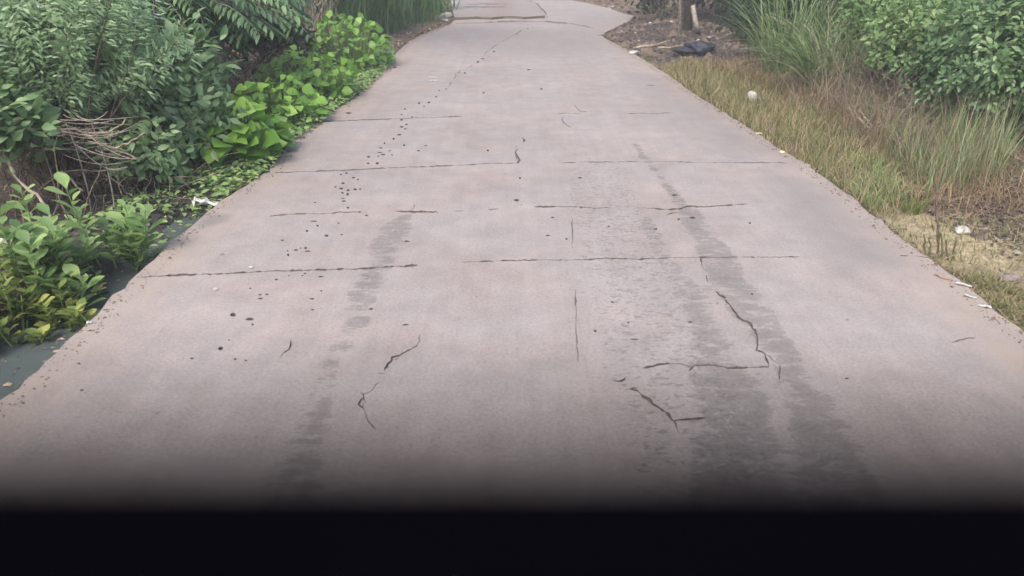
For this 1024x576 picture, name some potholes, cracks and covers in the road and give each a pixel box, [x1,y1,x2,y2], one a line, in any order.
crack [358,336,420,419]
crack [469,206,795,379]
crack [613,376,706,419]
crack [278,139,525,173]
